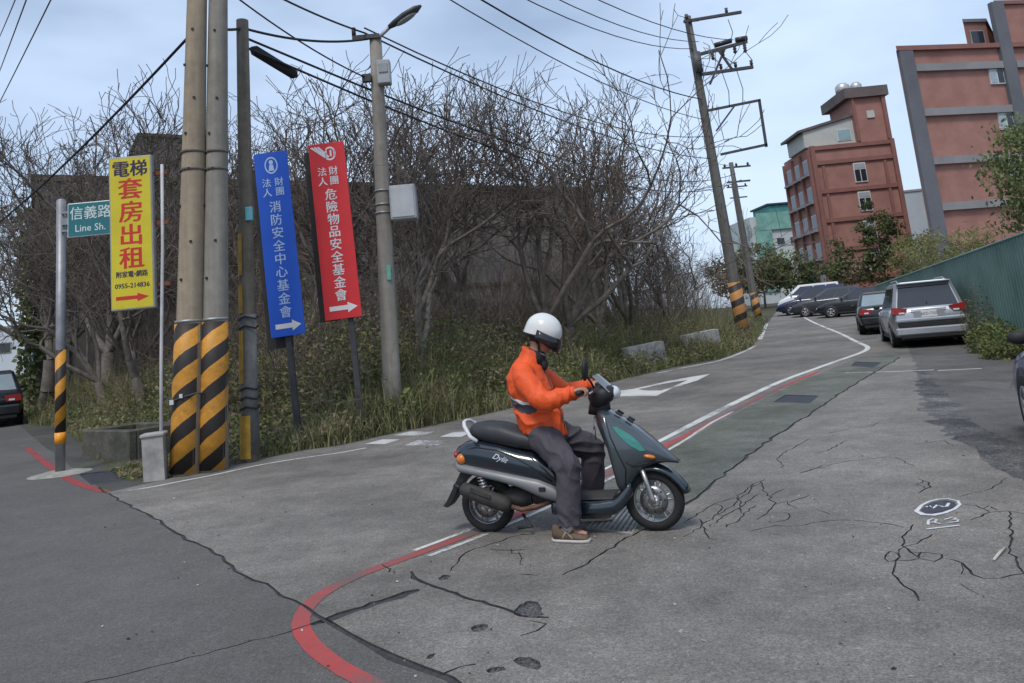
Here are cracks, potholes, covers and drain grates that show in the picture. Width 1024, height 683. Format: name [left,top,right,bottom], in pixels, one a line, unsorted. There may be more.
drain grate [586,507,645,534]
pothole [514,601,544,618]
crack [683,422,1024,601]
crack [562,528,646,575]
crack [85,534,549,683]
pothole [471,624,488,632]
pothole [513,657,542,670]
